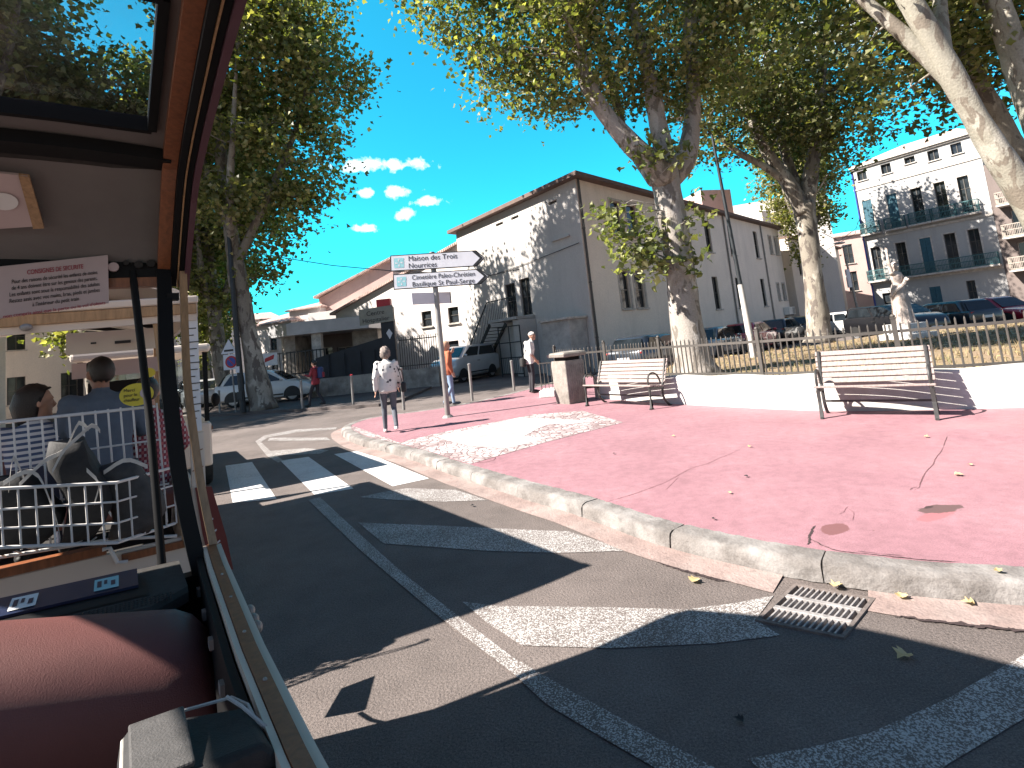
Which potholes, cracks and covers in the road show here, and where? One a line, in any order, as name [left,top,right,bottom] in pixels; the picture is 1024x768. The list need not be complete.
drain grate [755,583,876,640]
crack [807,526,956,562]
